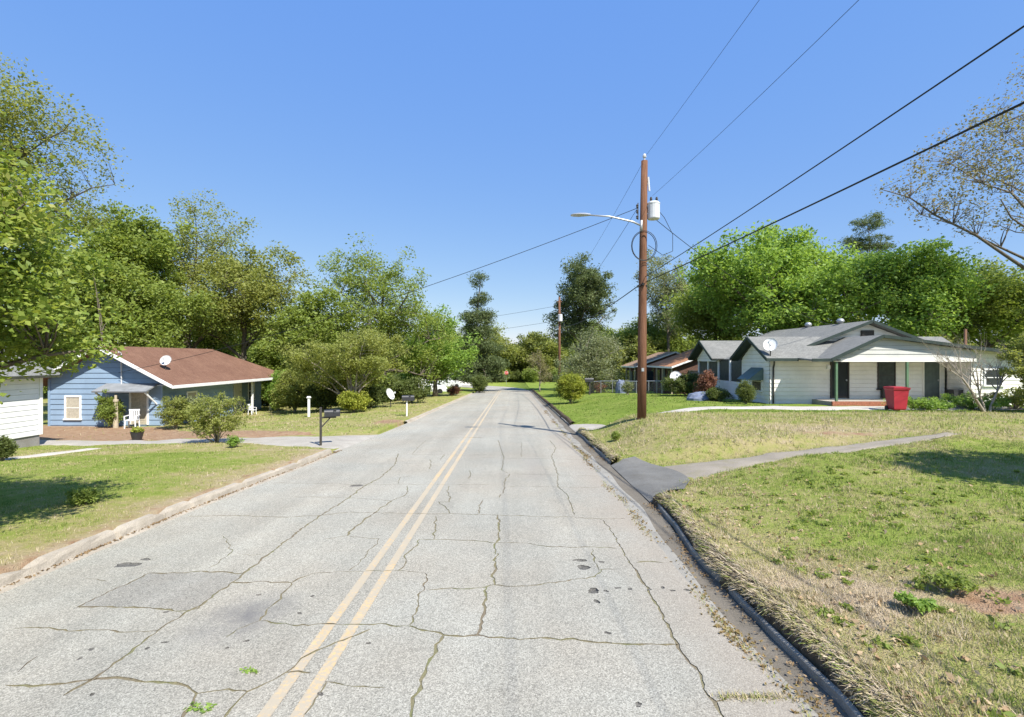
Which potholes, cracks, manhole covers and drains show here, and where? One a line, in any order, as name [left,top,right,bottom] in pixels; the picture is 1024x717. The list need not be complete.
crack [5,441,767,717]
